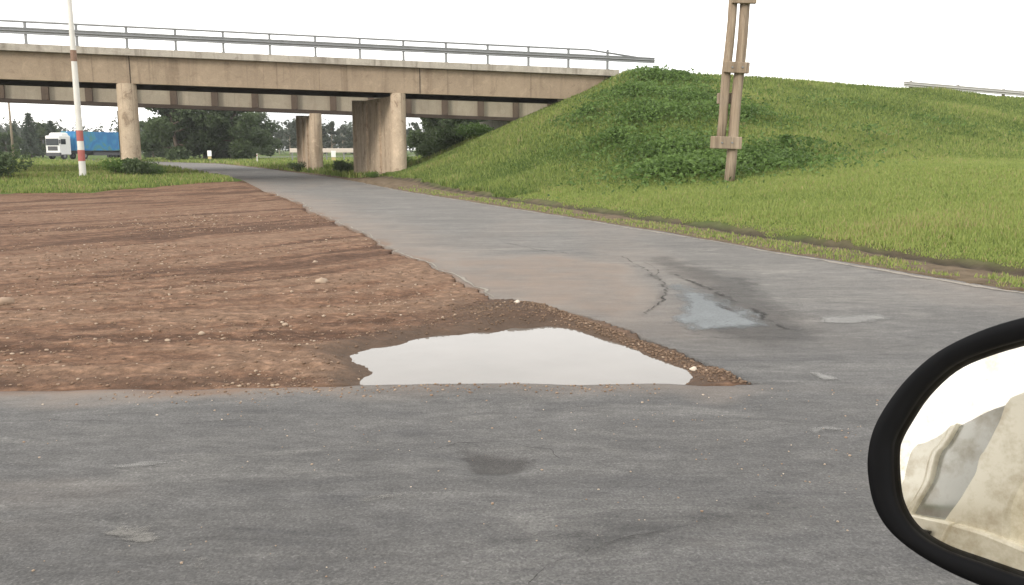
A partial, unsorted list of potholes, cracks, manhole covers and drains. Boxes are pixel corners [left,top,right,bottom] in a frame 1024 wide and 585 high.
crack [628,259,794,330]
pothole [293,308,747,387]
